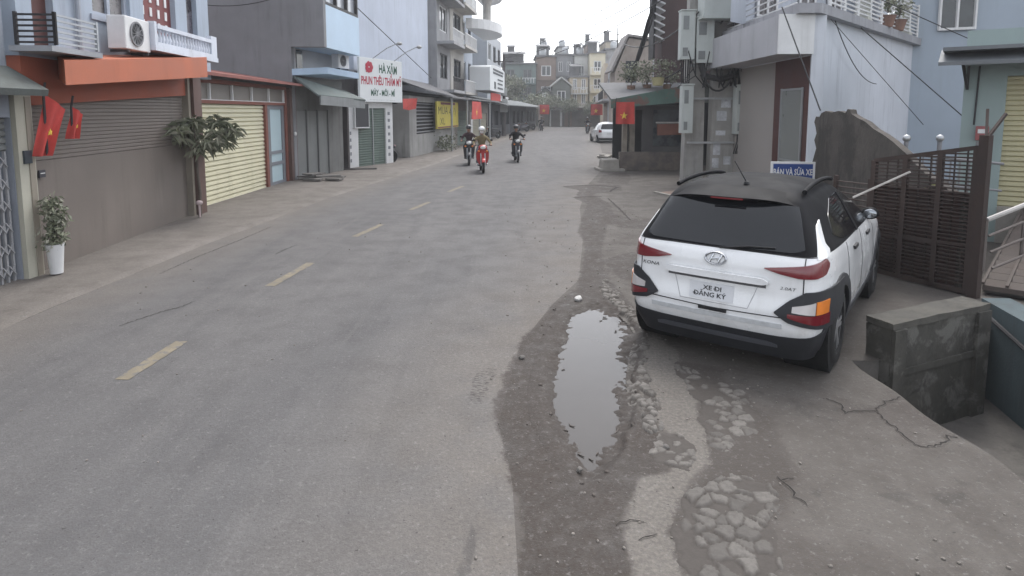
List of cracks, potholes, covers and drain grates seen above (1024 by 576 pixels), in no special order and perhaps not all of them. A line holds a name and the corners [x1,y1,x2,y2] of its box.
crack [120,301,195,326]
crack [599,279,807,576]
crack [826,396,958,448]
pothole [527,297,652,497]
